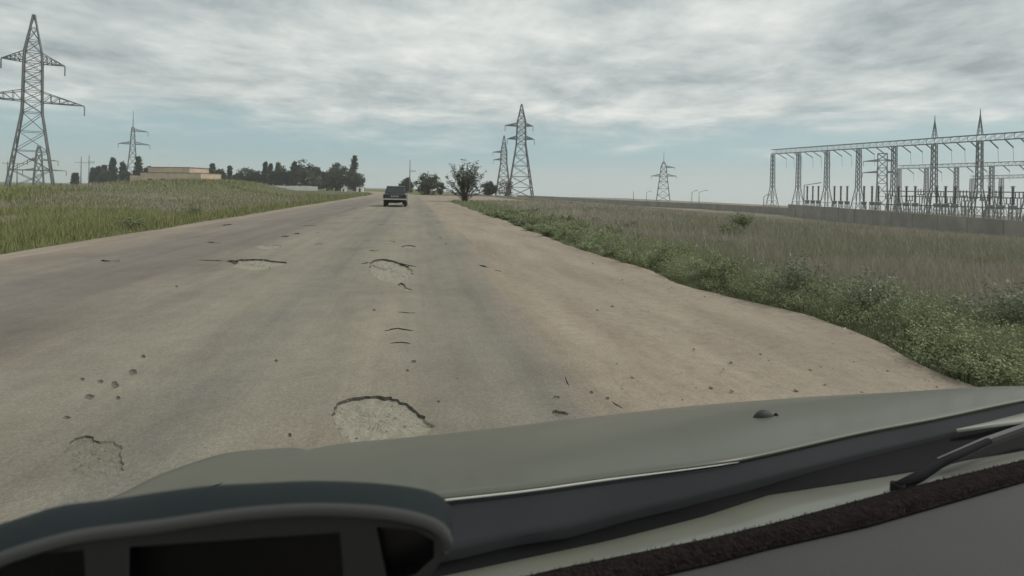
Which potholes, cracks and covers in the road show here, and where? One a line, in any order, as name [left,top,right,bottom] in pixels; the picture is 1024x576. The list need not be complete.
pothole [331,396,435,442]
pothole [231,259,287,270]
pothole [369,259,413,282]
pothole [62,435,125,477]
